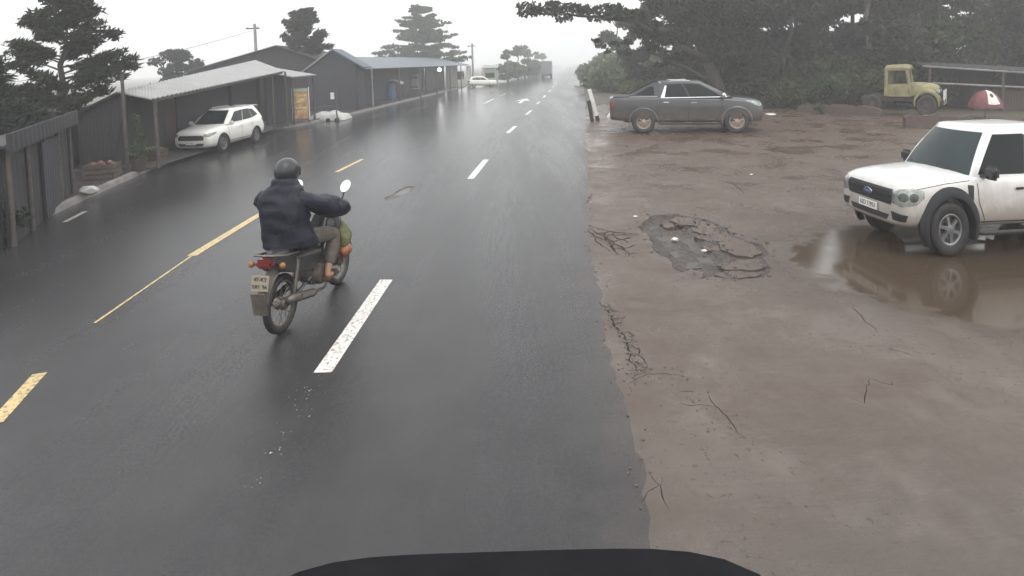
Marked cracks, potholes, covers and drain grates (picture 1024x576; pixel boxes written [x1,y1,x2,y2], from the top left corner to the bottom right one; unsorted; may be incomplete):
crack [598,302,762,453]
pothole [383,186,415,200]
pothole [628,213,781,281]
crack [640,475,669,509]
crack [584,225,649,261]
